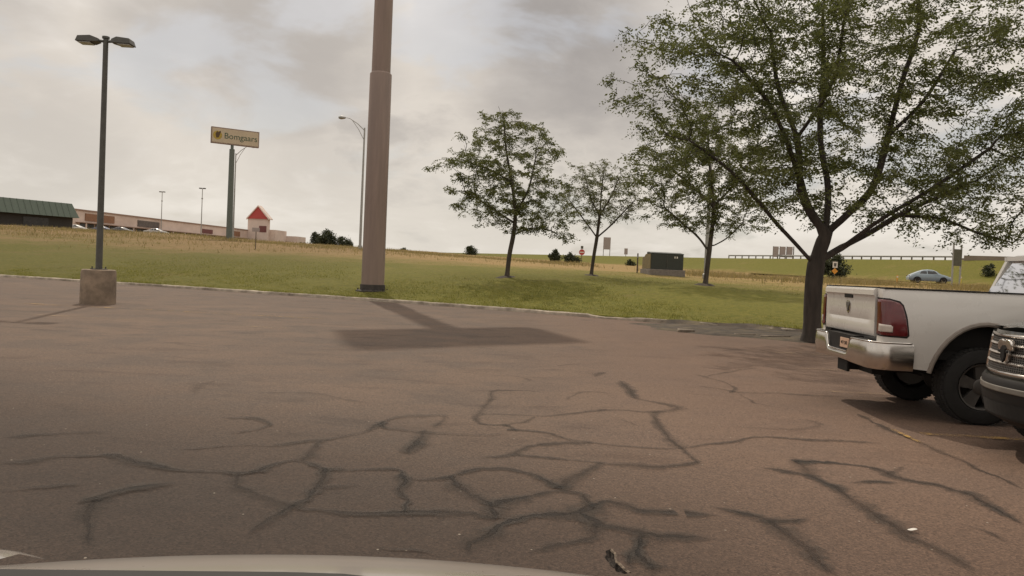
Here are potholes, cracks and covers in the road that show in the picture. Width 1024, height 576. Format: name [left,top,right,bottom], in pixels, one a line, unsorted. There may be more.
crack [770,424,1017,522]
crack [380,422,485,448]
crack [107,461,827,568]
